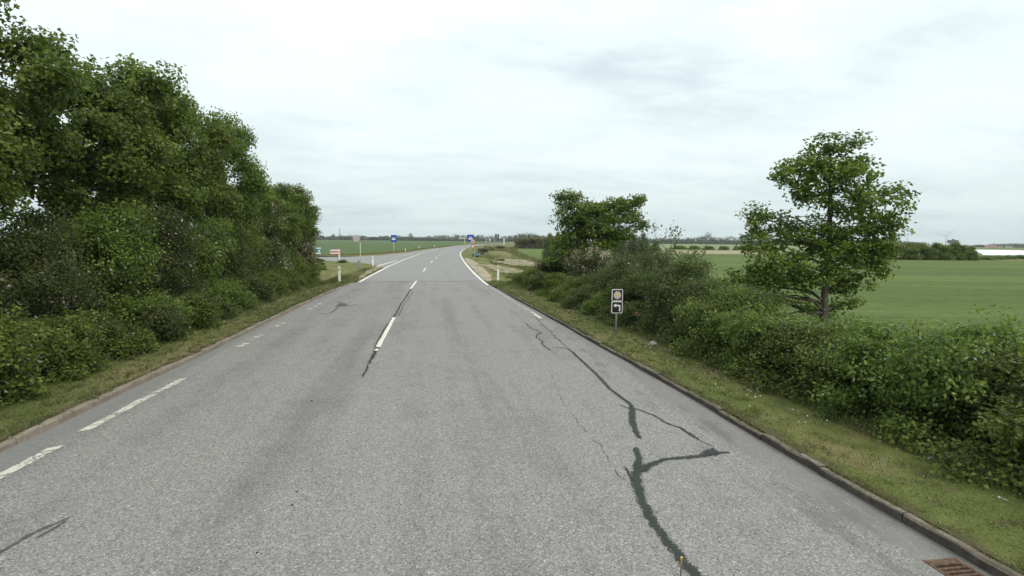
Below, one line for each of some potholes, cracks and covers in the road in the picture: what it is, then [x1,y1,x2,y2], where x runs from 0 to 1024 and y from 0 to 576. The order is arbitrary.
crack [0,517,70,553]
crack [526,318,568,355]
drain grate [923,557,985,576]
